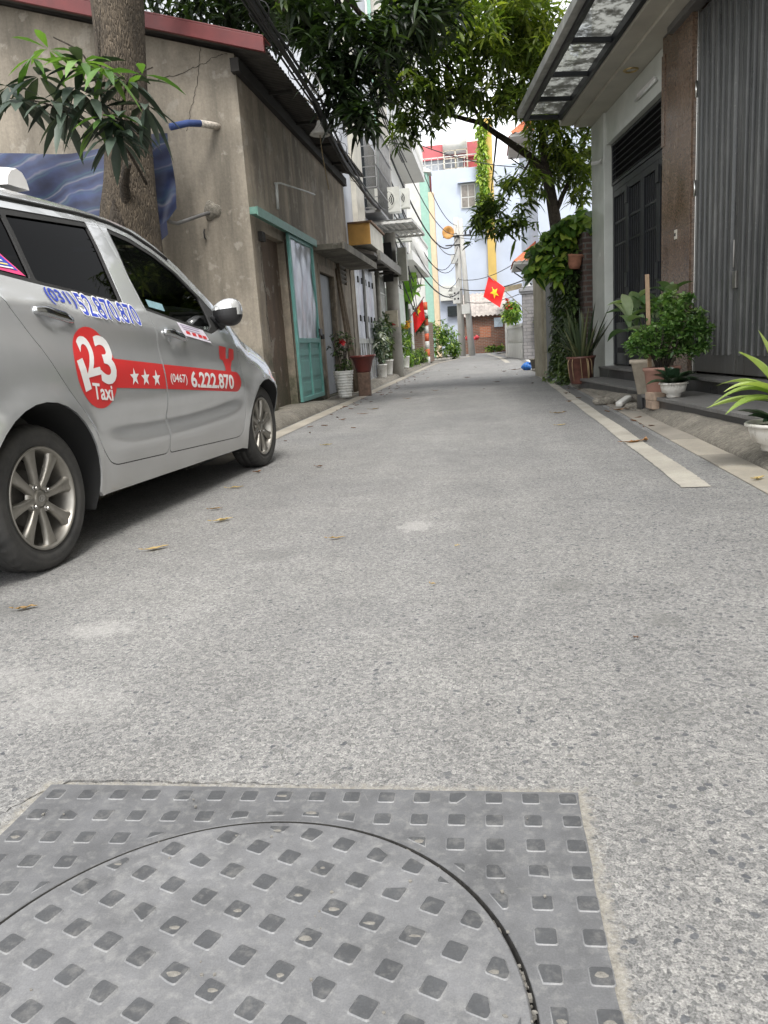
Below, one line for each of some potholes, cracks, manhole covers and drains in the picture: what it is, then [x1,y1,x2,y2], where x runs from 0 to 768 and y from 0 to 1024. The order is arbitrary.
manhole cover [0,784,625,1024]
